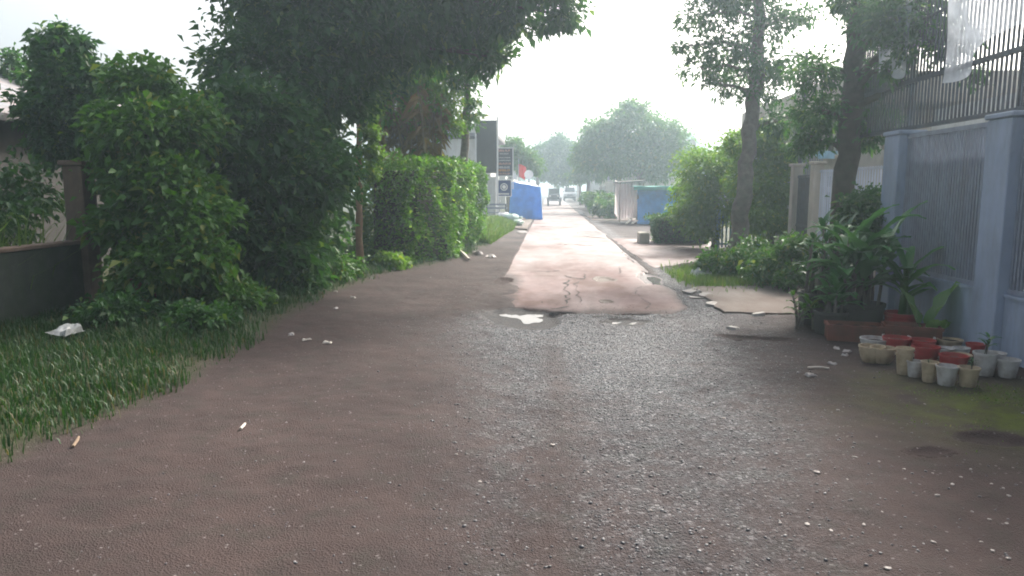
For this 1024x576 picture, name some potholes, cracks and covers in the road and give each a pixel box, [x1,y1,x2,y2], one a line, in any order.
pothole [951,430,1024,447]
pothole [477,308,560,330]
crack [542,236,675,318]
pothole [900,446,961,458]
